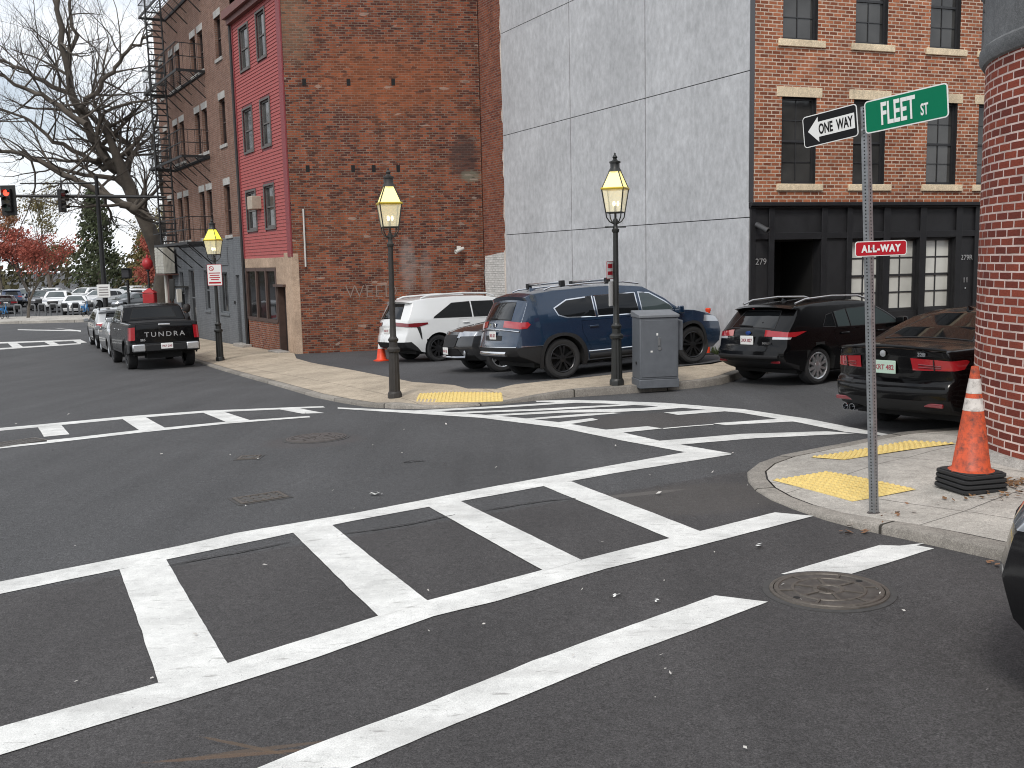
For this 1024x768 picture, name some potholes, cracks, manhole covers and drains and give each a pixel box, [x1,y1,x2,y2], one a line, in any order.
manhole cover [282,432,350,444]
manhole cover [762,571,898,613]
